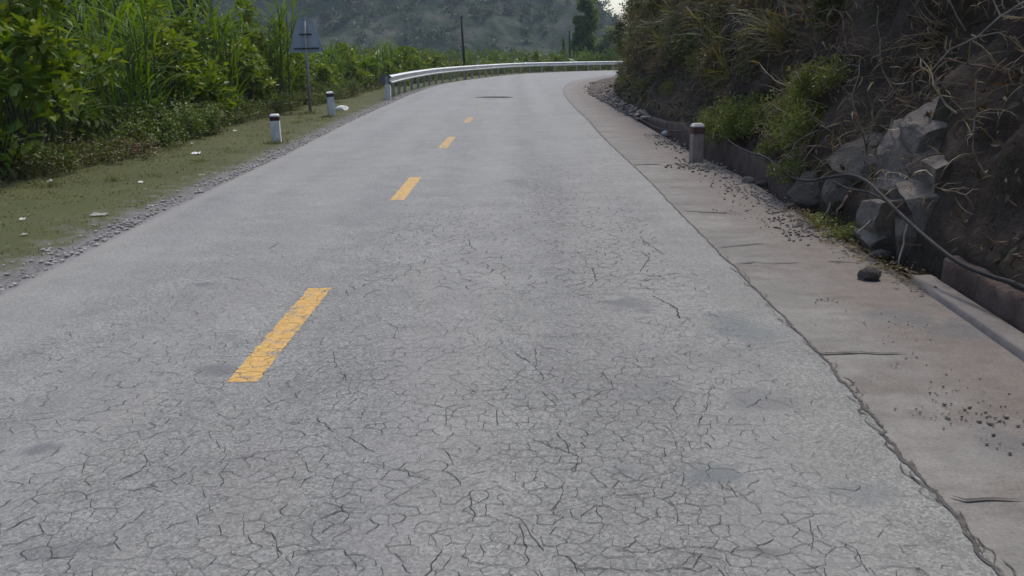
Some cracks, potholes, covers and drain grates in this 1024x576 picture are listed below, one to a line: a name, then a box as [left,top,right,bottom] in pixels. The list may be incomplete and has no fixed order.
crack [0,218,384,576]
crack [145,83,1017,576]
